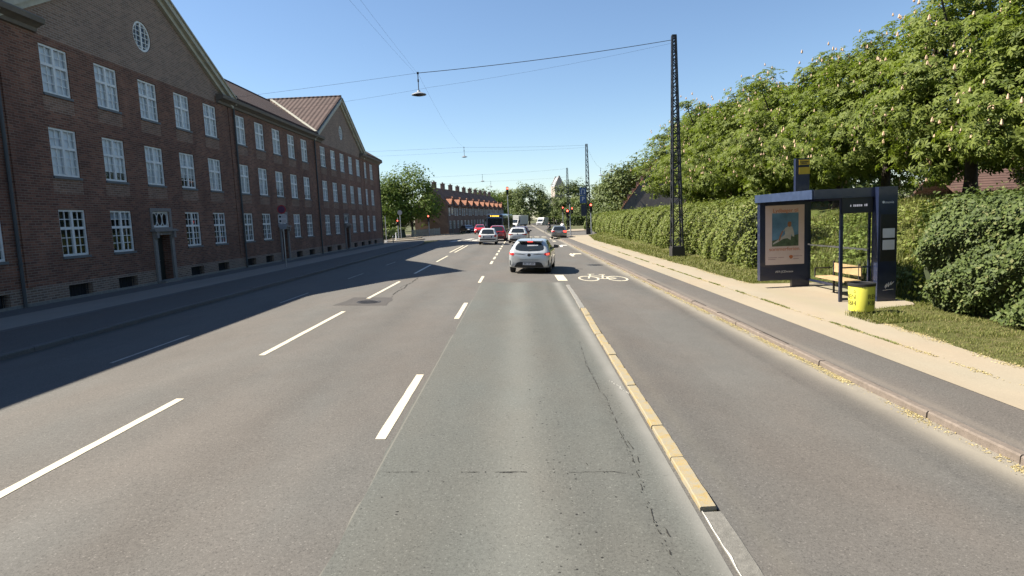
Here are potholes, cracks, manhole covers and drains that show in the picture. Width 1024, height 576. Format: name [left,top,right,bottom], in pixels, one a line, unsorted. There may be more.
crack [411,347,680,574]
